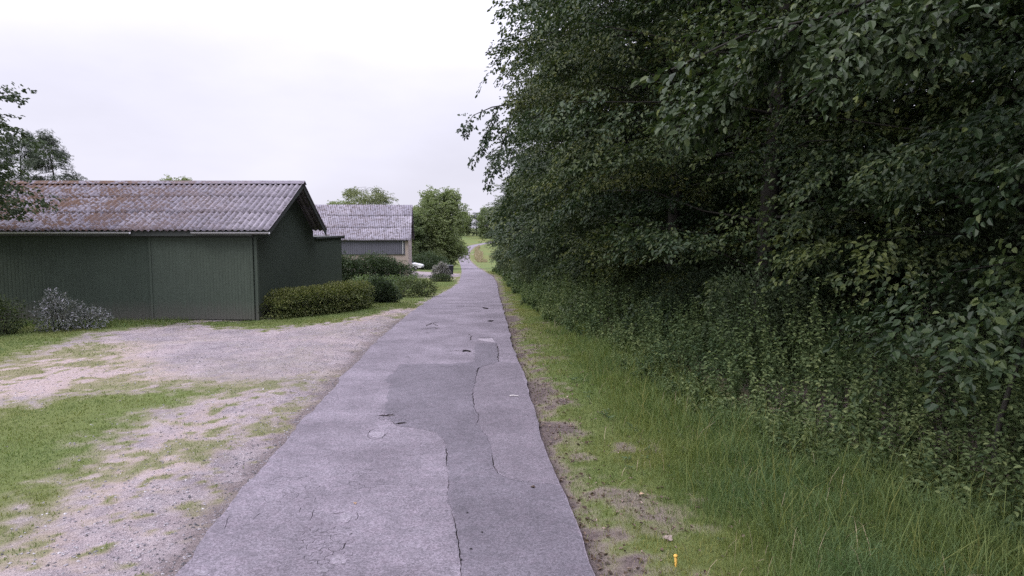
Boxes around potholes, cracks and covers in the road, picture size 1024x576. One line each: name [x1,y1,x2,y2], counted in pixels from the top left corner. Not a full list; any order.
crack [258,472,358,576]
